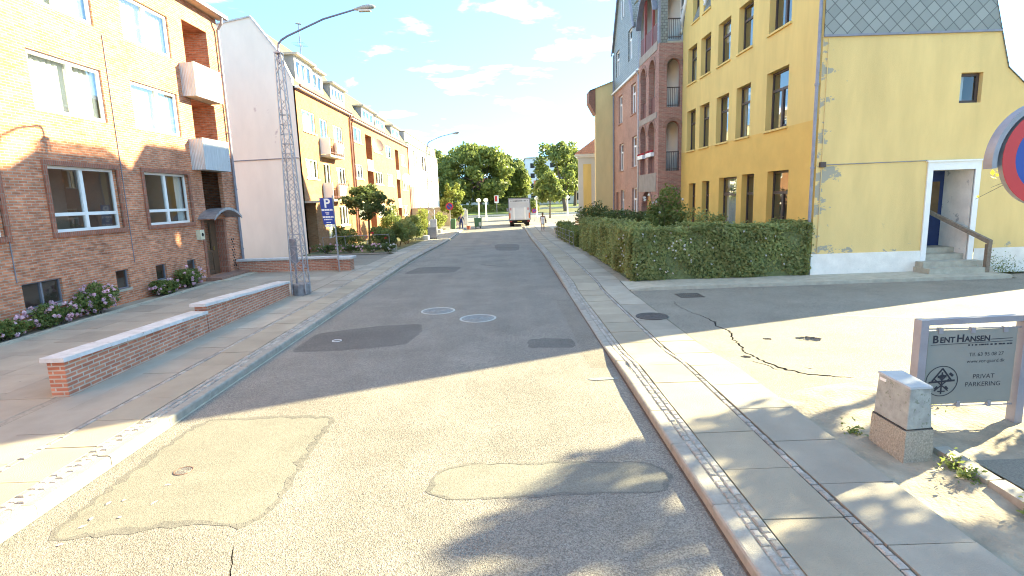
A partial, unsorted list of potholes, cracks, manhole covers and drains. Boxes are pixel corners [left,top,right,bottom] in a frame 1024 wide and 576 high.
crack [674,303,853,378]
manhole cover [636,312,668,320]
